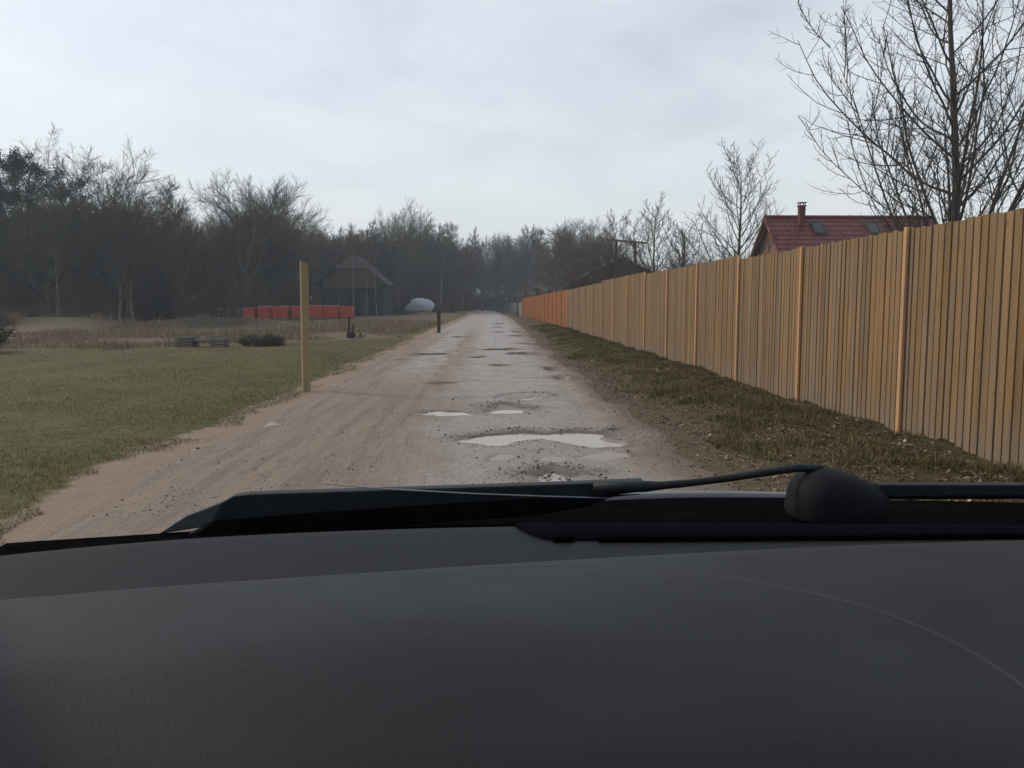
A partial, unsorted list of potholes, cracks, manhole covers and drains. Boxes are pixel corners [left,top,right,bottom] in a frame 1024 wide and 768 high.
pothole [517,466,595,482]
pothole [477,402,535,414]
pothole [448,429,627,448]
pothole [573,450,631,461]
